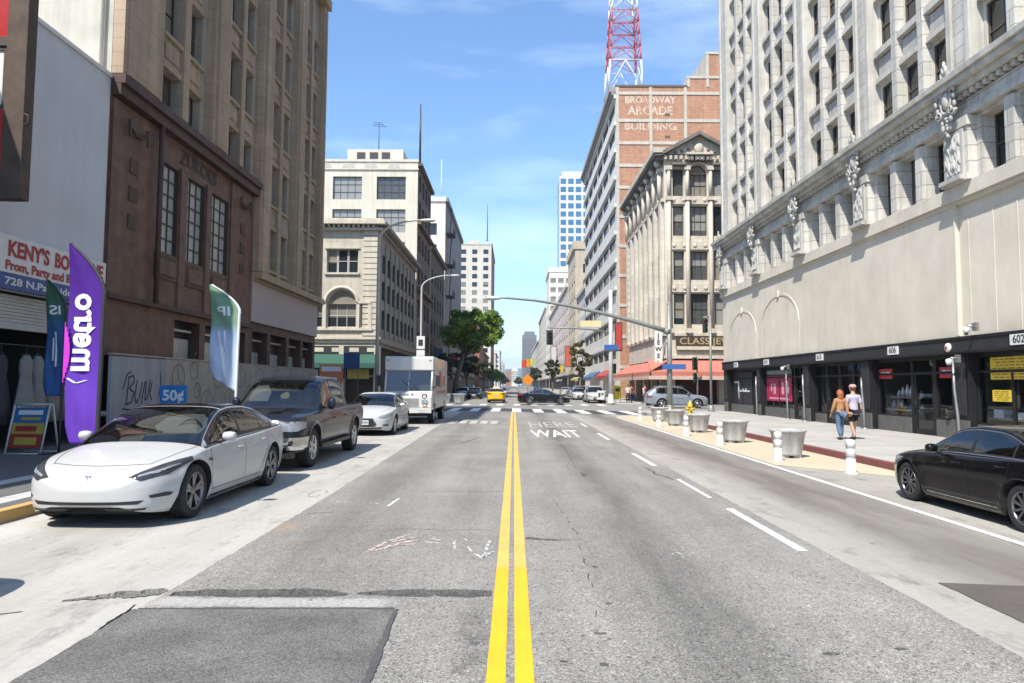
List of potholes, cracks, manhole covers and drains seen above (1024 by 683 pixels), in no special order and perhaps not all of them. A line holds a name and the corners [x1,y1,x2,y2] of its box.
crack [526,500,597,617]
